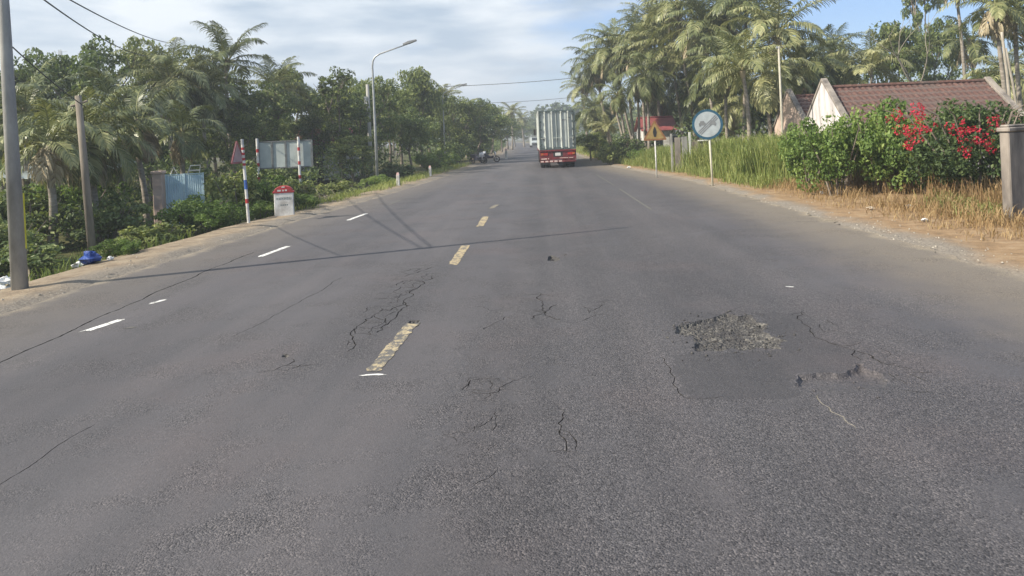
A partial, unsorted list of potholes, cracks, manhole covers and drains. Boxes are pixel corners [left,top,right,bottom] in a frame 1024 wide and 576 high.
pothole [793,356,898,398]
crack [546,409,578,453]
crack [462,378,516,400]
crack [347,265,433,352]
pothole [662,306,802,361]
crack [795,313,933,393]
